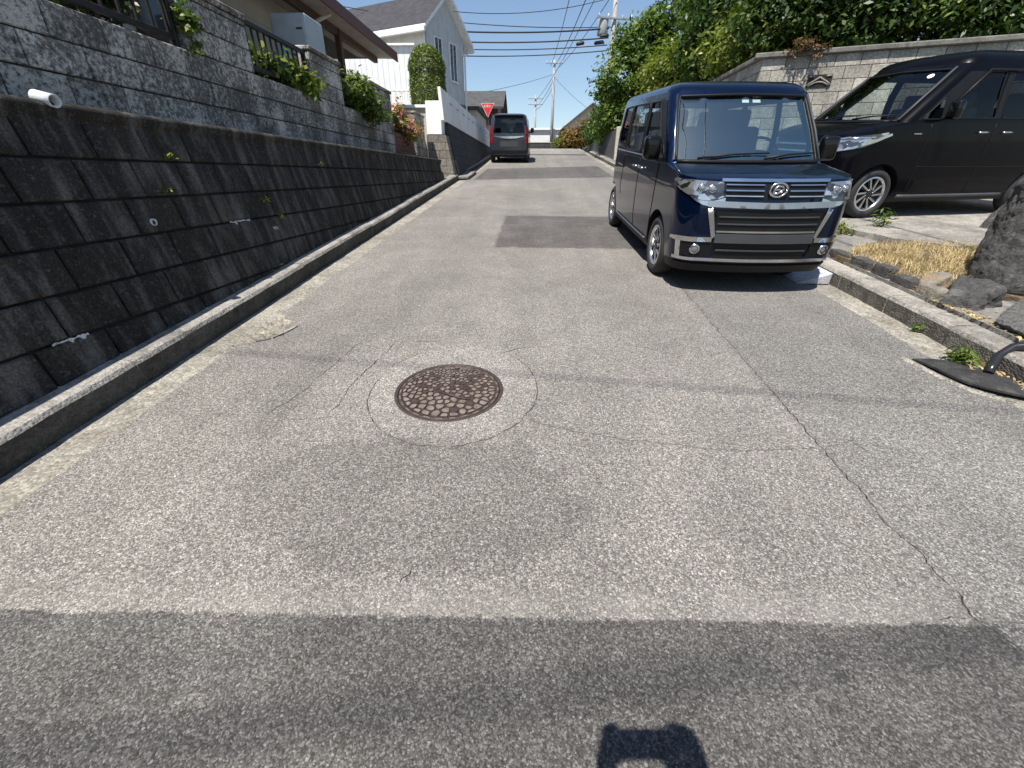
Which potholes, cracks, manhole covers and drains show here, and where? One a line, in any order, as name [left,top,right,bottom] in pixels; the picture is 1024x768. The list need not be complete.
crack [530,278,1024,653]
manhole cover [394,364,503,422]
crack [264,340,436,421]
